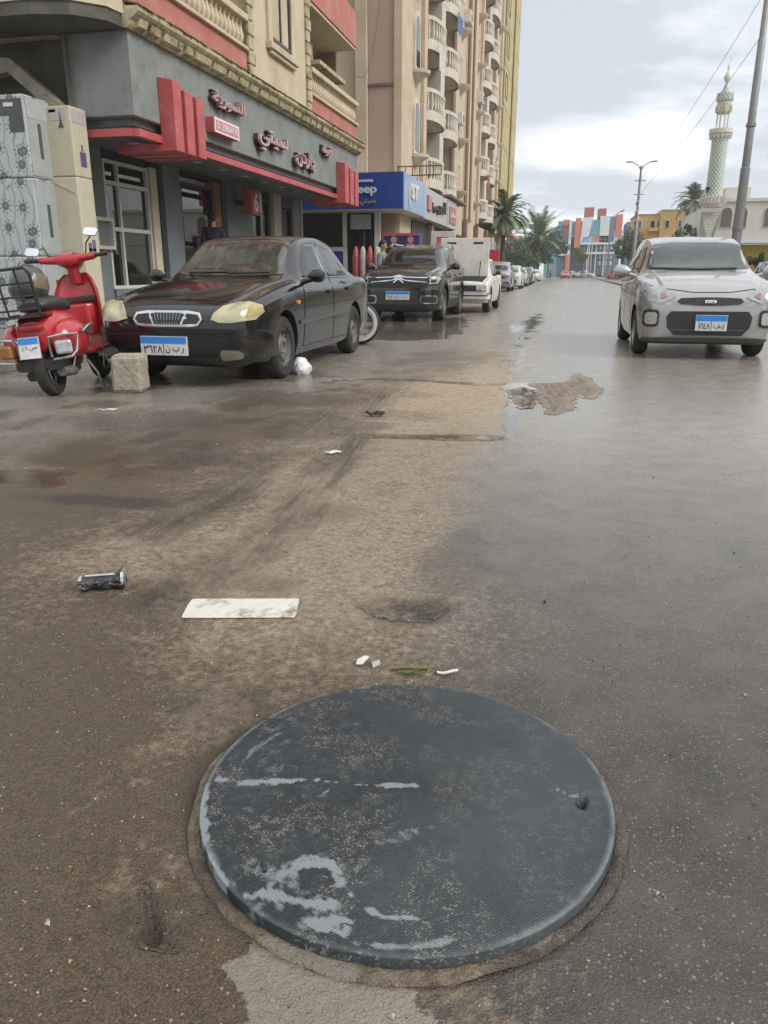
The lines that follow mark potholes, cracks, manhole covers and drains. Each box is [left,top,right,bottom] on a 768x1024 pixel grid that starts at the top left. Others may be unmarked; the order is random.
pothole [133,879,180,954]
manhole cover [187,684,629,987]
